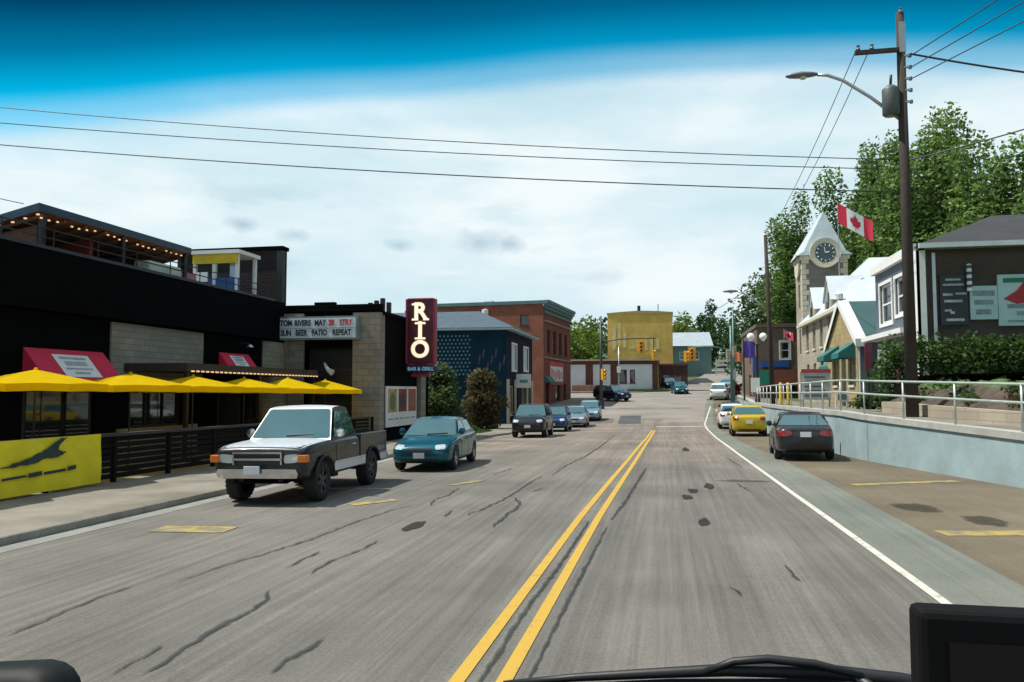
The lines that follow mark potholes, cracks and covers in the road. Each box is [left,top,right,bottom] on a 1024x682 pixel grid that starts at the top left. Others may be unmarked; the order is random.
crack [287,540,378,573]
crack [273,639,322,671]
pothole [401,521,426,531]
crack [11,587,127,634]
